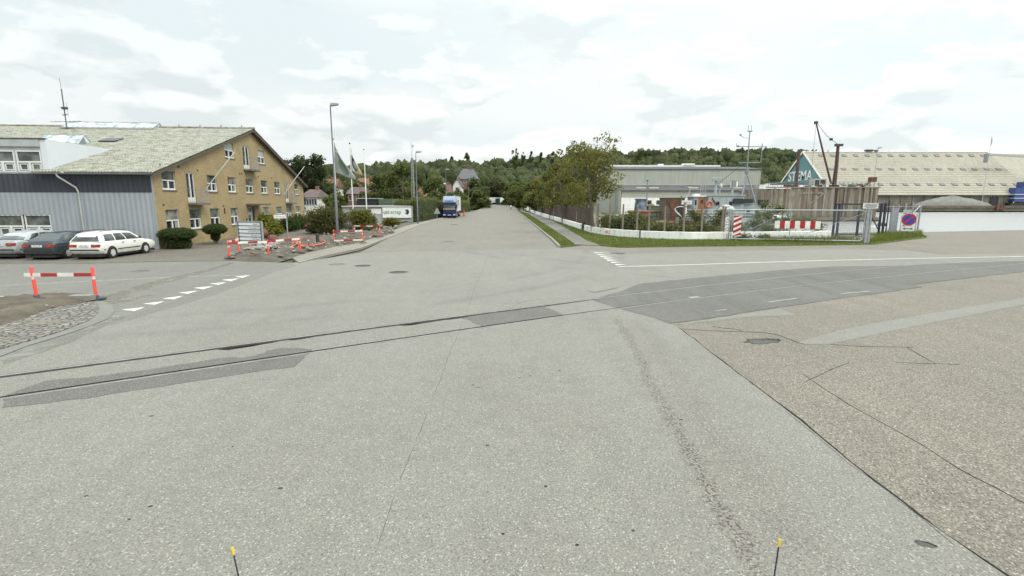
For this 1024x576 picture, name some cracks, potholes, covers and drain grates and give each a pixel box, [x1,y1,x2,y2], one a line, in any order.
crack [788,413,954,545]
crack [802,363,1024,503]
crack [833,344,961,365]
